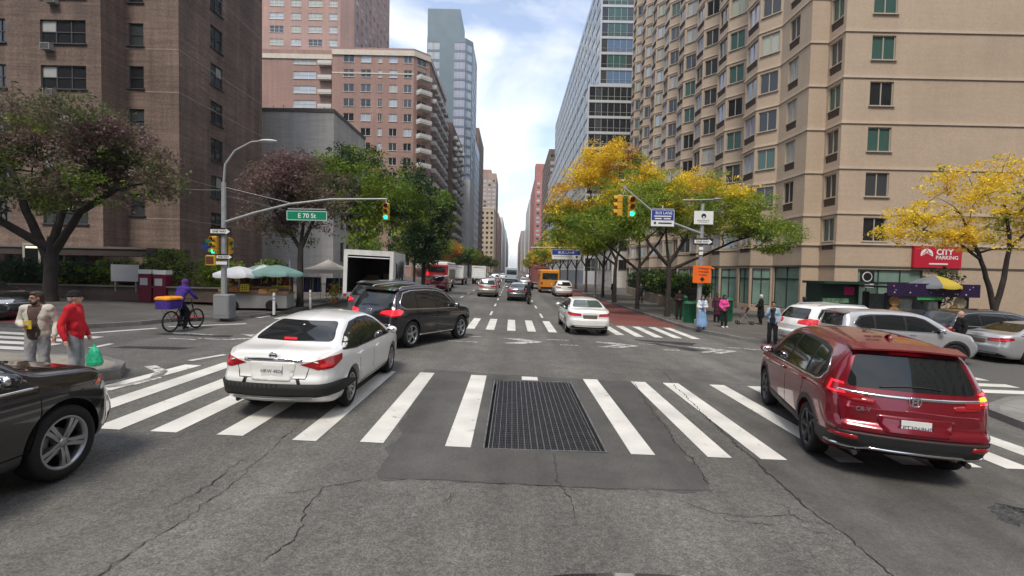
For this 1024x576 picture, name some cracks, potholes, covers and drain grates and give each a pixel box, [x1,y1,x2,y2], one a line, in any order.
drain grate [483,380,608,453]
crack [268,361,832,557]
crack [97,421,303,576]
